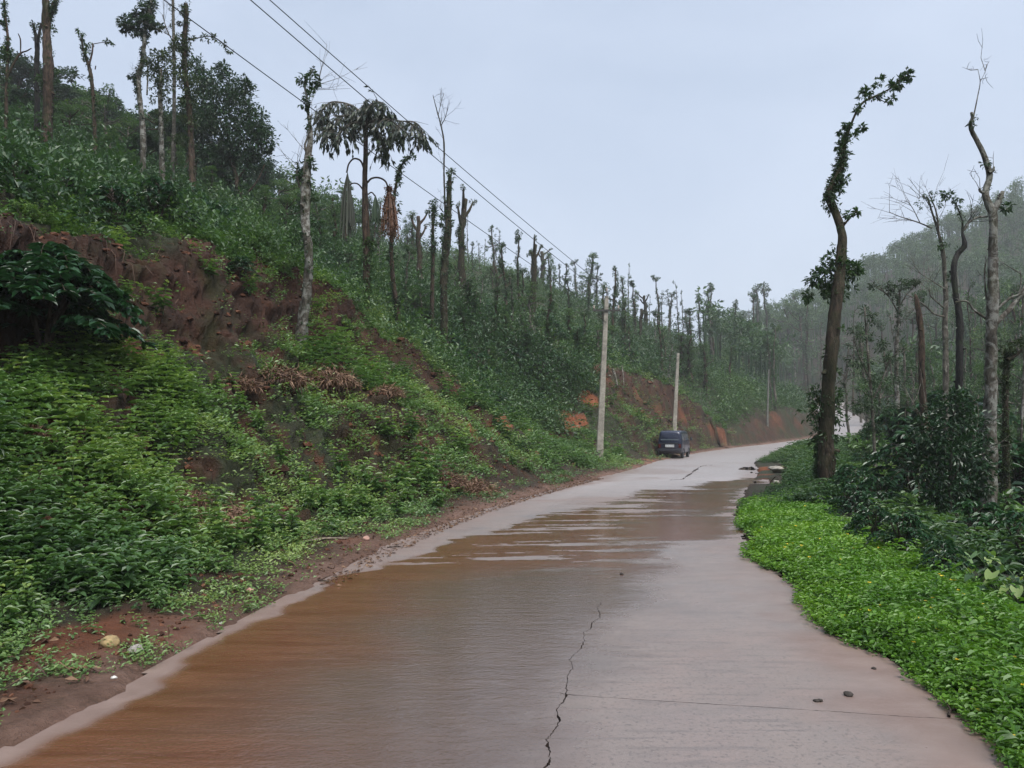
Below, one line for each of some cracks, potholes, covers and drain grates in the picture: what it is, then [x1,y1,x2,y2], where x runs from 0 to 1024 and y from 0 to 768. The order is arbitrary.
crack [543,604,601,768]
